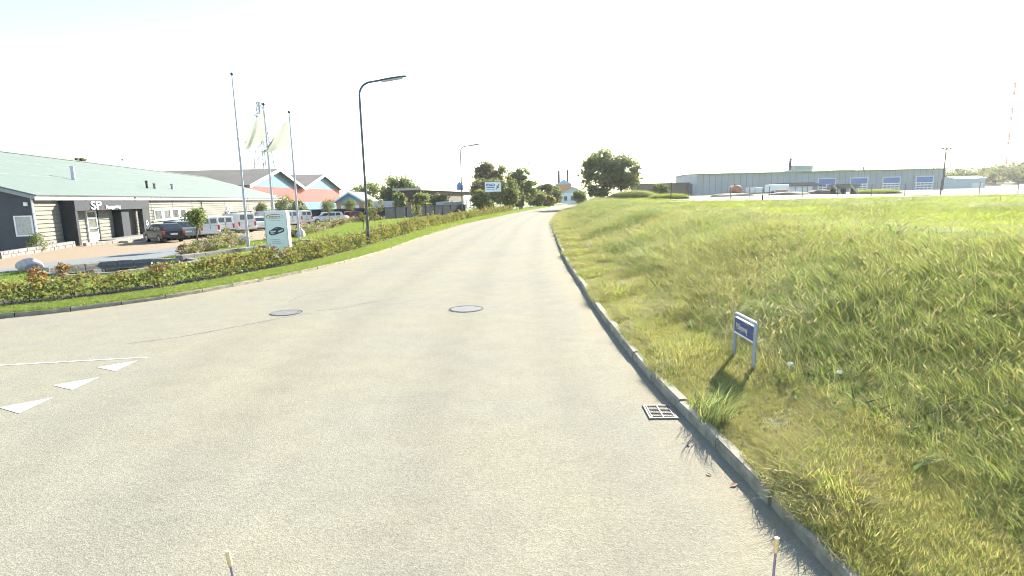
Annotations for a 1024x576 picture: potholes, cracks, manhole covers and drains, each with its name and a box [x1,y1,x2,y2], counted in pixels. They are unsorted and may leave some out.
drain grate [642,404,679,420]
manhole cover [448,305,484,313]
